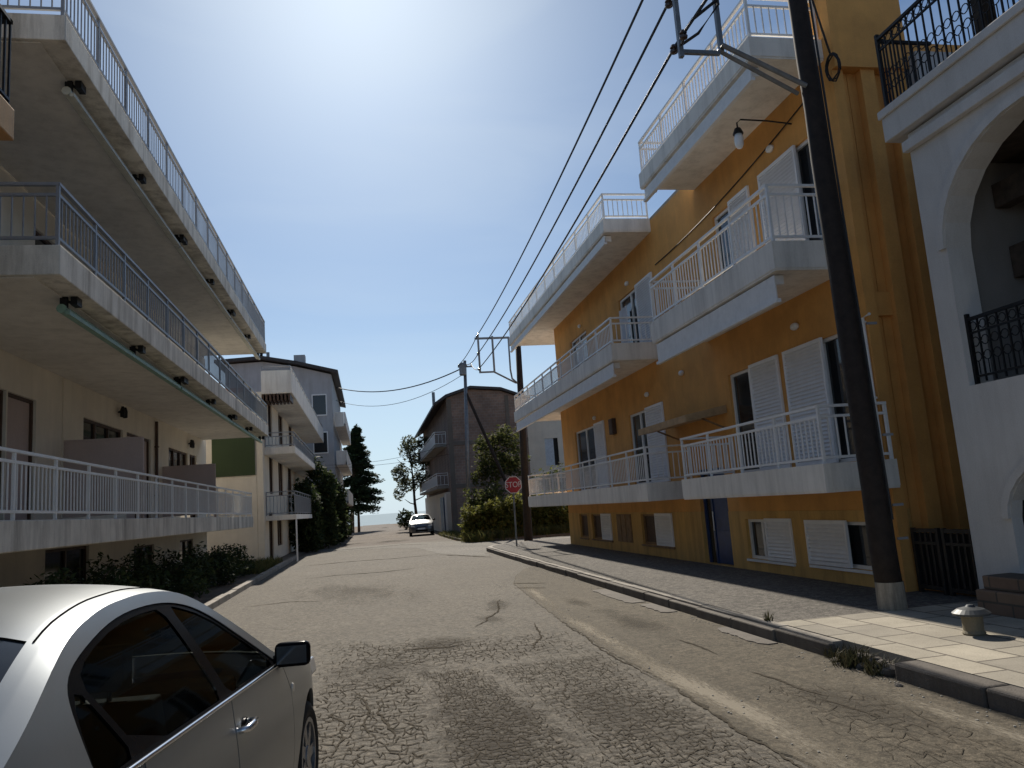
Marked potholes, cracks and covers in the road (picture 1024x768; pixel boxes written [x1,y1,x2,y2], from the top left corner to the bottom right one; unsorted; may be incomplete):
crack [315,599,789,768]
